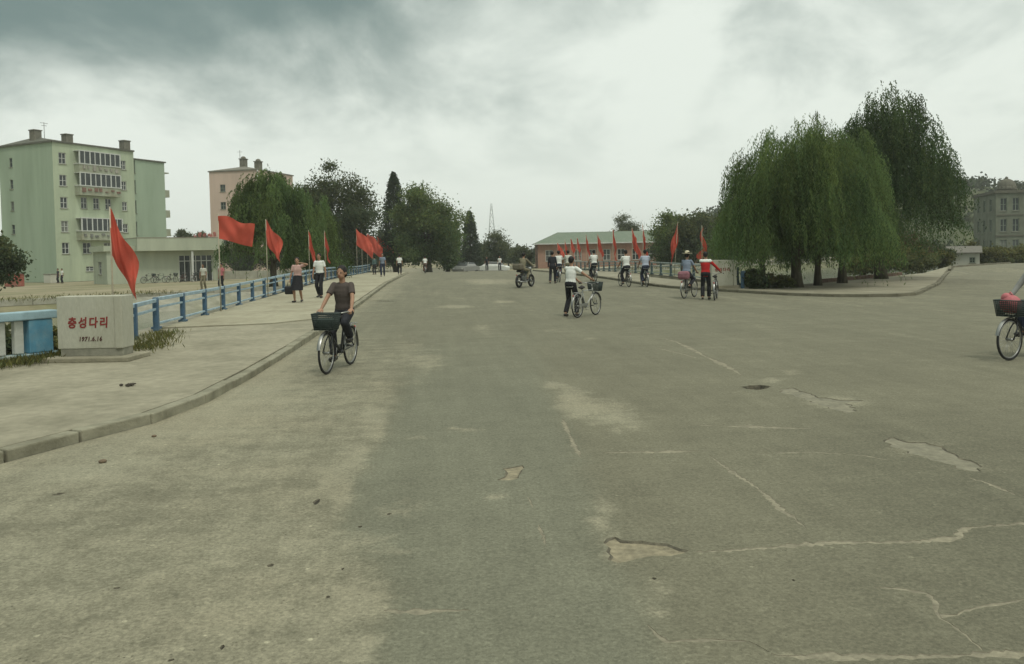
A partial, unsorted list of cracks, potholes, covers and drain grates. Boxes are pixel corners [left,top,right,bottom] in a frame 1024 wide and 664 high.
pothole [604,537,689,563]
crack [561,419,581,460]
pothole [498,465,524,480]
pothole [883,437,982,471]
crack [605,450,1024,553]
crack [655,338,742,375]
pothole [779,388,864,412]
crack [648,587,1024,661]
